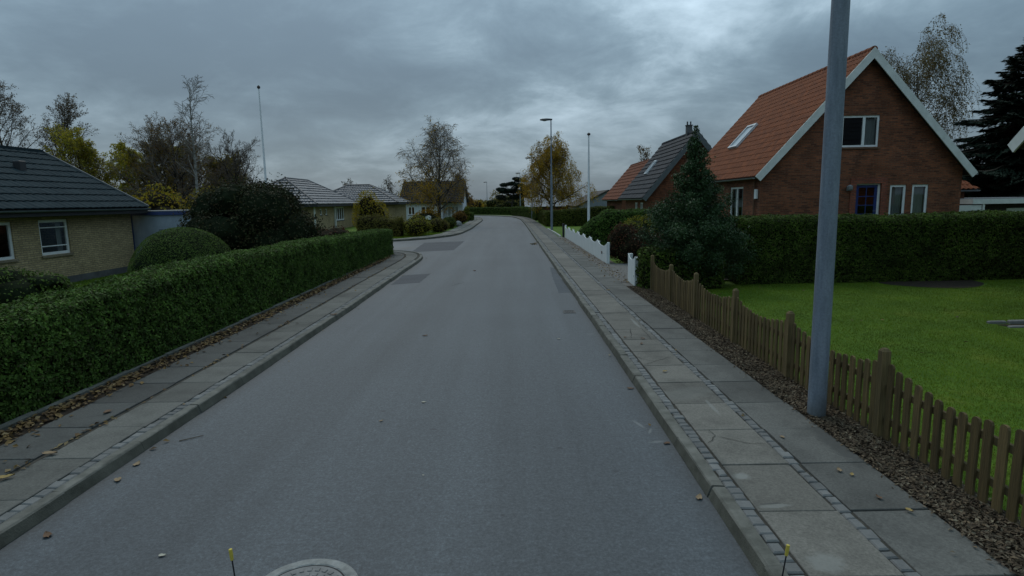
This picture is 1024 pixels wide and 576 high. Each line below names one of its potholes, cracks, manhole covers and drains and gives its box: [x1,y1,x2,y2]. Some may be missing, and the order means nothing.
manhole cover [266,559,358,576]
